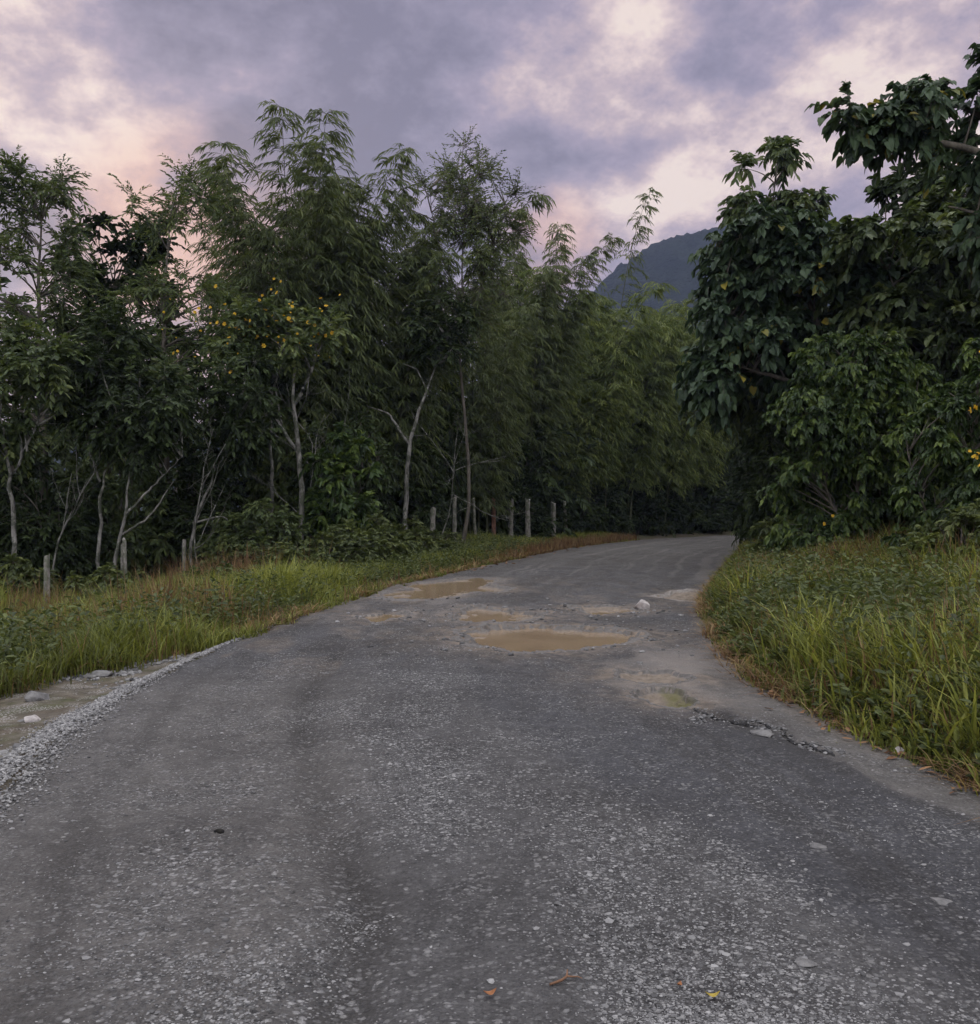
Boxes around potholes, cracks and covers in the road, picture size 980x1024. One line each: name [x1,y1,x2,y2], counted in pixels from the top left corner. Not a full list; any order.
crack [685,707,851,757]
pothole [358,610,413,623]
pothole [449,622,651,654]
pothole [612,669,697,685]
pothole [626,686,700,709]
pothole [567,604,648,616]
pothole [368,577,517,602]
pothole [447,604,549,623]
